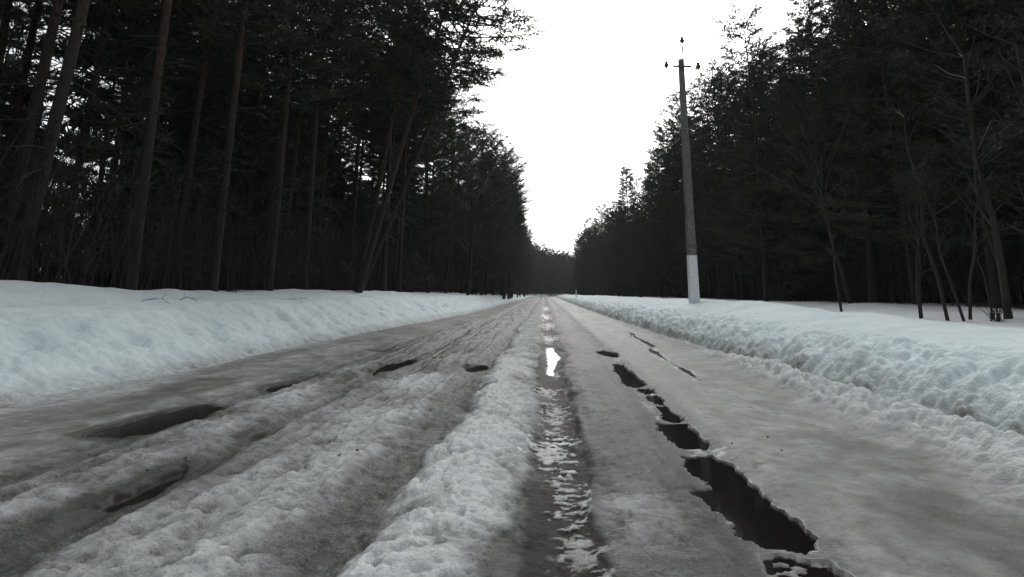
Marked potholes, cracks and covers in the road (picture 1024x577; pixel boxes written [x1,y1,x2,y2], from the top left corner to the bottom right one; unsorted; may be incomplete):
crack [629,332,702,381]
pothole [81,404,225,439]
pothole [262,376,320,393]
pothole [458,364,490,372]
pothole [85,466,189,513]
pothole [363,359,417,376]
